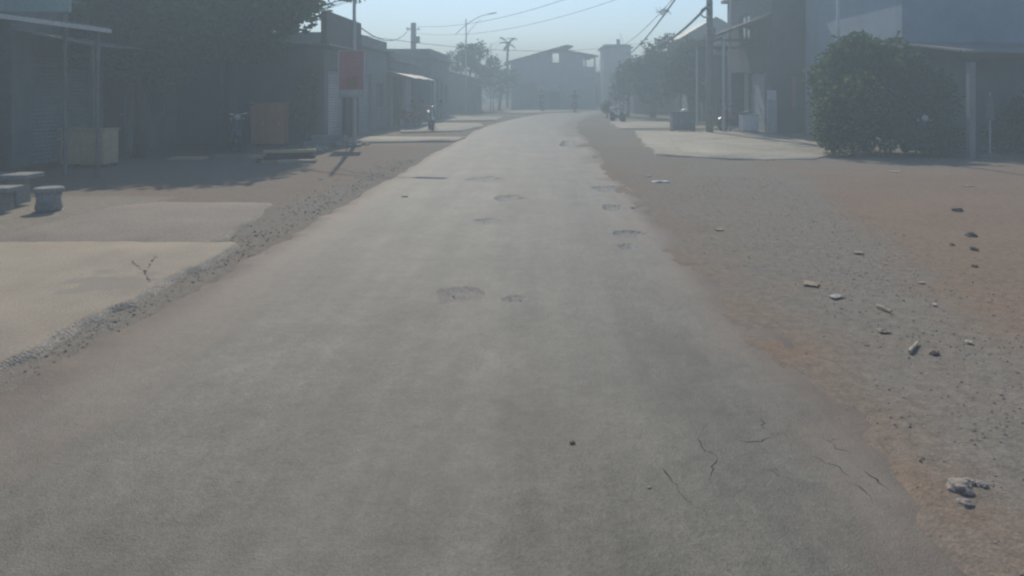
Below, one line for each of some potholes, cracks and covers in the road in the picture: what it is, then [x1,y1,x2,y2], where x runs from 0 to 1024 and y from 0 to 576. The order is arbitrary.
pothole [500,295,528,303]
pothole [591,185,632,193]
pothole [617,243,640,251]
crack [698,420,889,504]
pothole [602,204,627,212]
pothole [612,230,647,238]
pothole [435,286,485,305]
